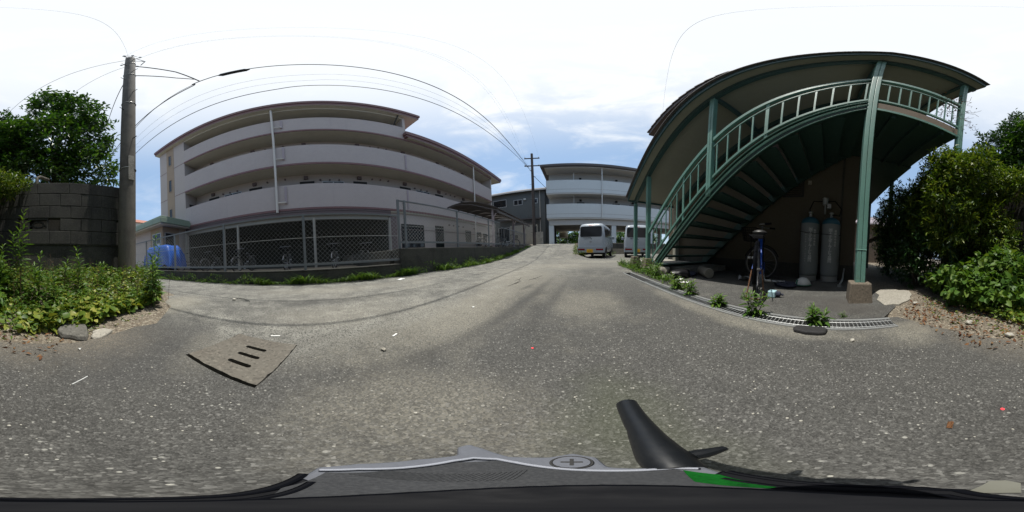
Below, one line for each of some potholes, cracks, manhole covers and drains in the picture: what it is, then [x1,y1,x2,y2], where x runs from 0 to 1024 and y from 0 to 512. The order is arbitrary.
drain grate [624,272,899,331]
manhole cover [188,334,296,388]
